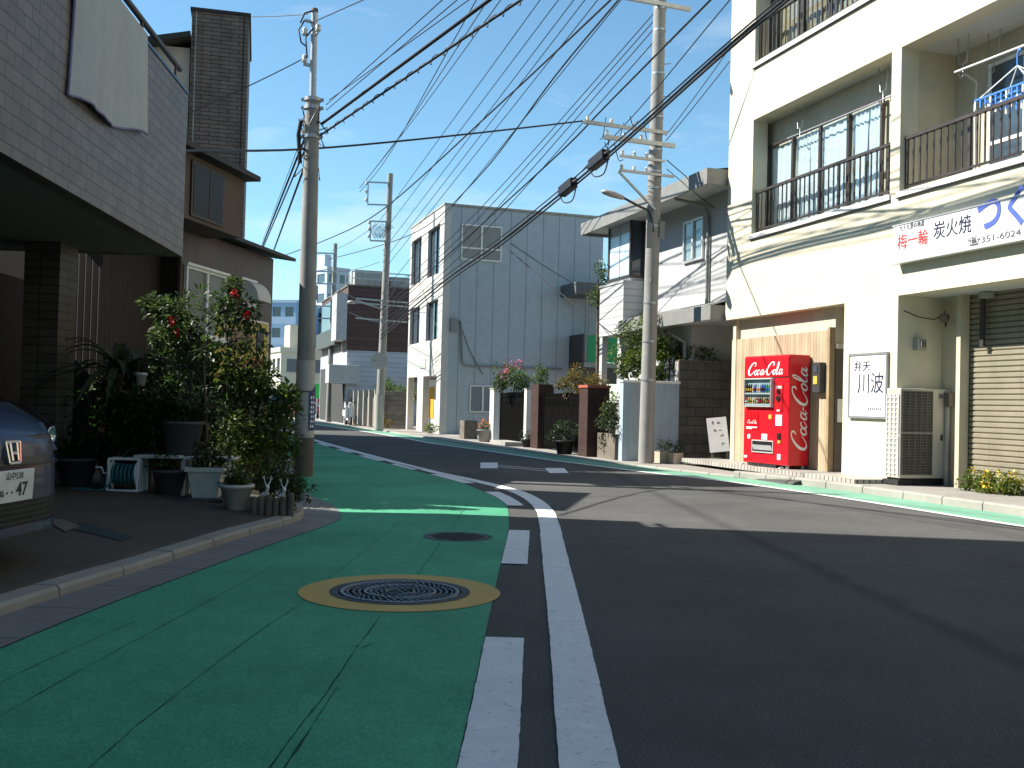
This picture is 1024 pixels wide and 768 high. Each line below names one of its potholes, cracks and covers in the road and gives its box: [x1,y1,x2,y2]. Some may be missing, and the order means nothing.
manhole cover [298,574,500,612]
manhole cover [423,532,492,541]
